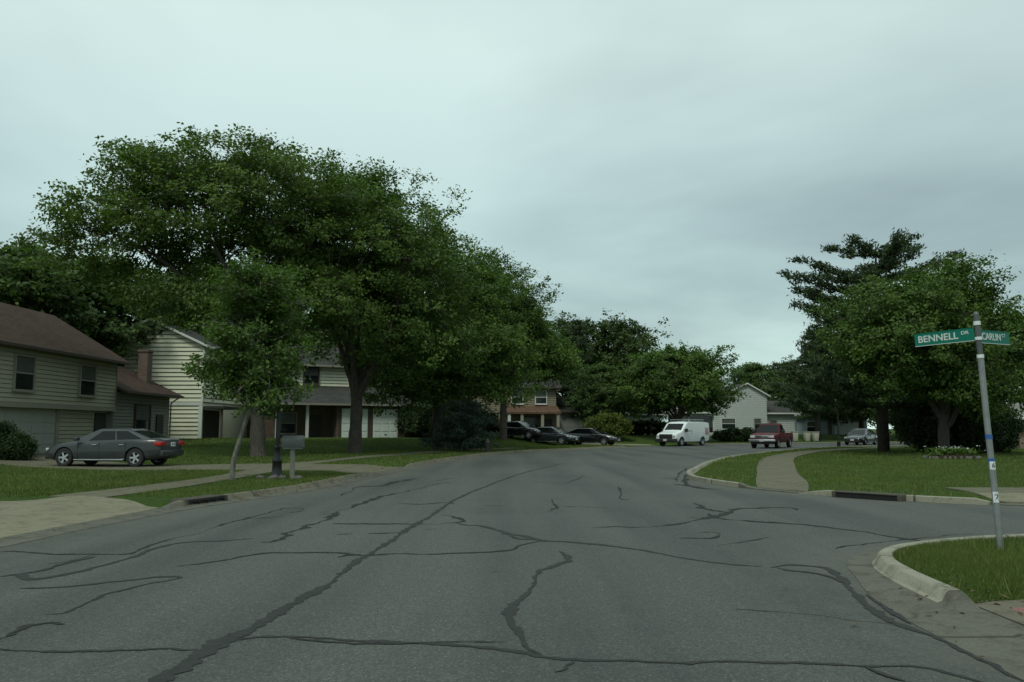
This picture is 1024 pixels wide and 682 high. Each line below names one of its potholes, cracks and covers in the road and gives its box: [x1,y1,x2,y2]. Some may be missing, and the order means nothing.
crack [540,475,627,512]
drain grate [170,494,228,505]
crack [594,467,974,548]
crack [743,609,891,624]
crack [0,478,542,652]
drain grate [832,490,909,502]
